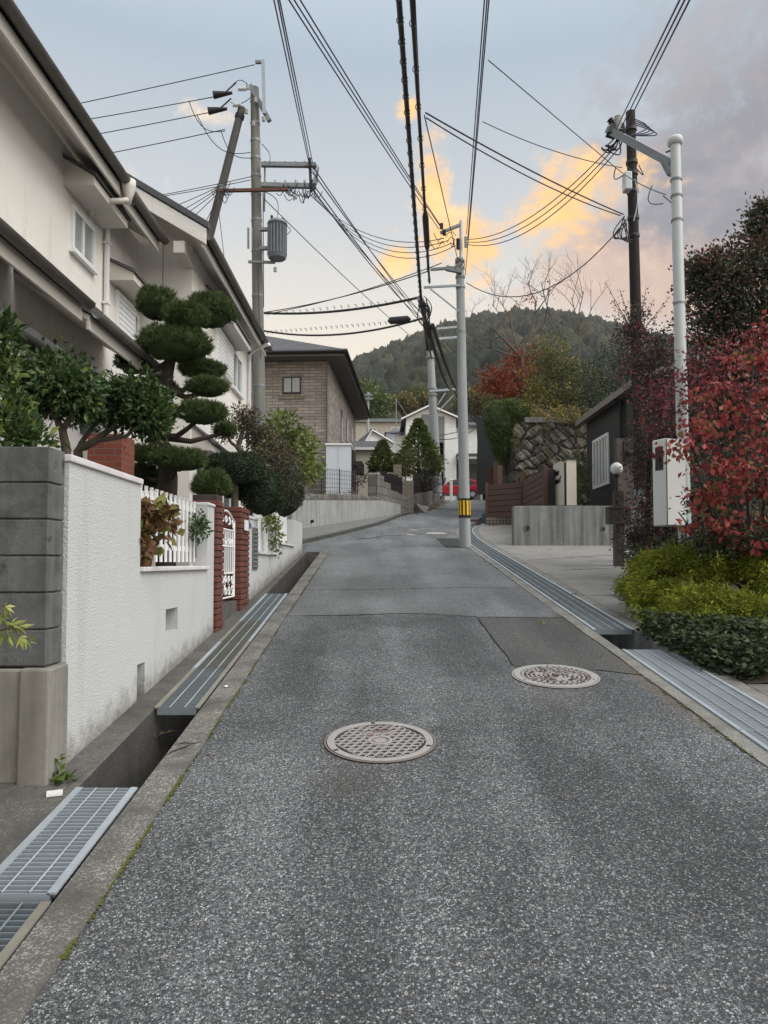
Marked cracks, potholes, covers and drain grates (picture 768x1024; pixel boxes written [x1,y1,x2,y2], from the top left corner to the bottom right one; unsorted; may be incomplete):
drain grate [739,730,768,752]
drain grate [239,605,278,622]
drain grate [193,641,251,670]
drain grate [0,787,138,907]
drain grate [255,593,288,610]
manhole cover [324,721,436,764]
drain grate [551,600,605,615]
drain grate [0,901,51,970]
drain grate [519,578,562,590]
drain grate [534,588,583,601]
drain grate [508,570,545,579]
drain grate [219,621,266,646]
